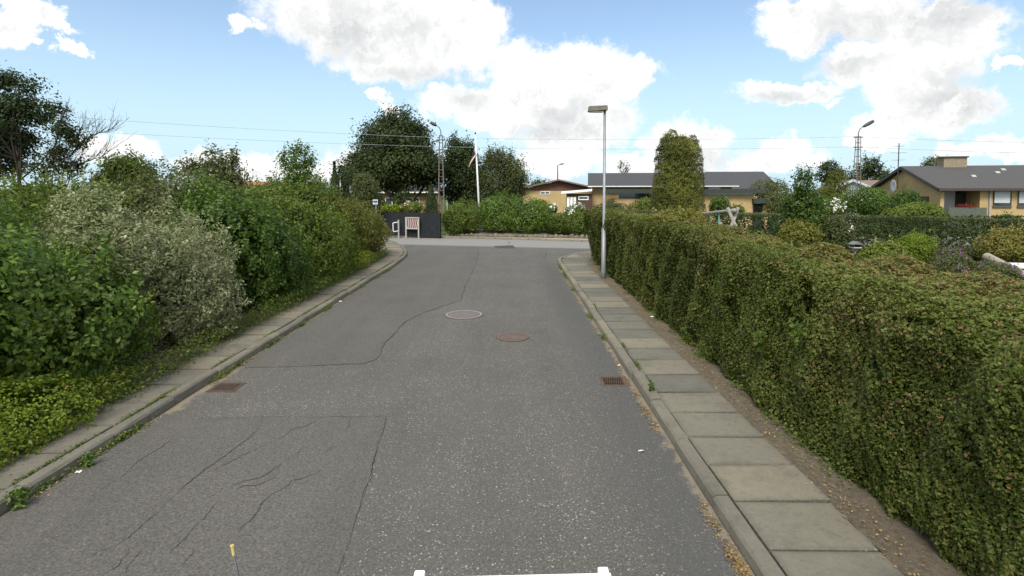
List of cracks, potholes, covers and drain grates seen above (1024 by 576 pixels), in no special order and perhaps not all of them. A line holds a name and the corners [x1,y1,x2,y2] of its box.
manhole cover [445,310,483,319]
drain grate [598,376,631,386]
manhole cover [496,333,529,342]
crack [91,416,387,575]
drain grate [206,382,247,392]
